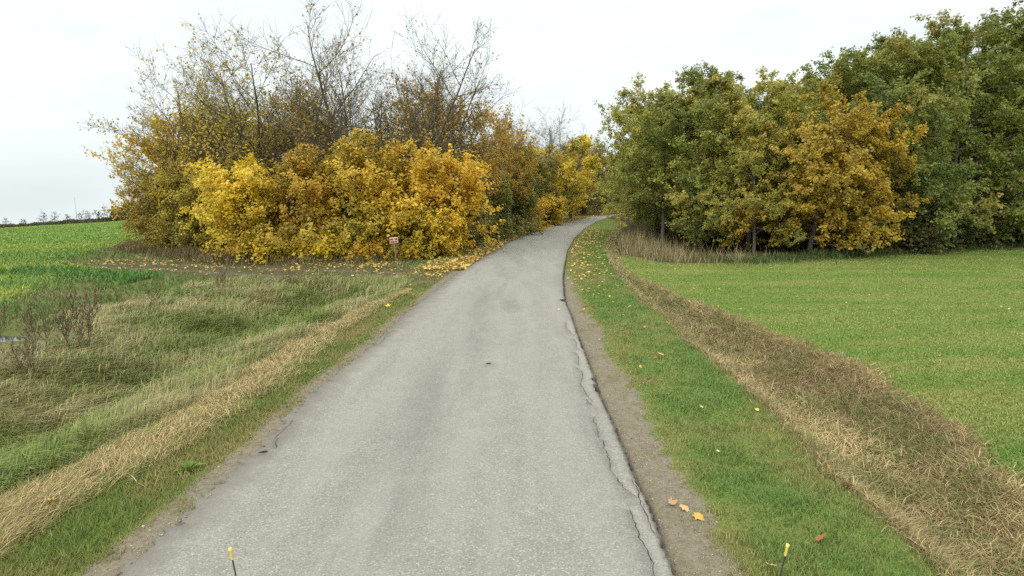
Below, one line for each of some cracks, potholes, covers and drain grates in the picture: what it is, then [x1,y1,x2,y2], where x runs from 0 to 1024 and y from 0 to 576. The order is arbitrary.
crack [574,333,655,576]
